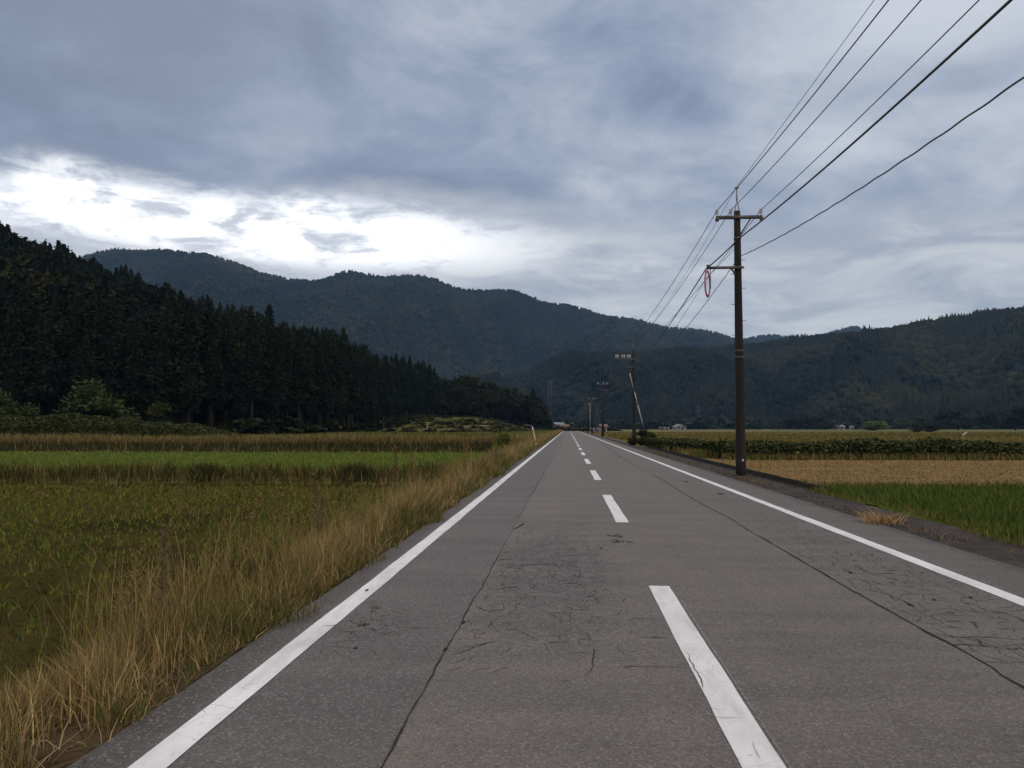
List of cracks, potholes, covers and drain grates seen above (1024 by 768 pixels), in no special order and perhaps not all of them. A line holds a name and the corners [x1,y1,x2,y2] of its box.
crack [722,505,1024,664]
crack [448,518,667,682]
crack [320,601,435,655]
